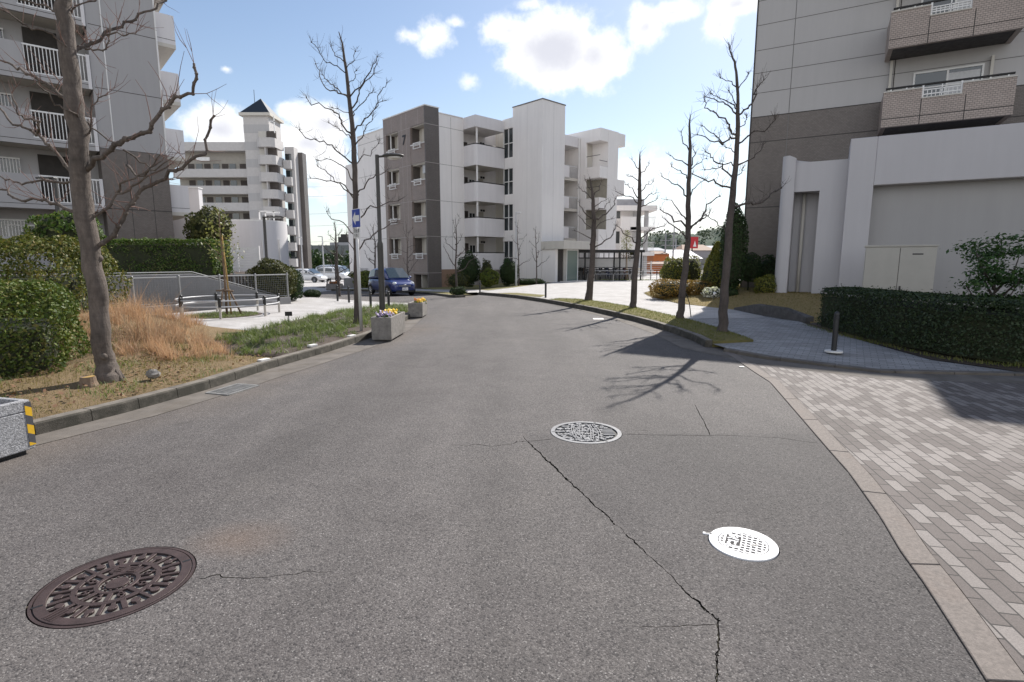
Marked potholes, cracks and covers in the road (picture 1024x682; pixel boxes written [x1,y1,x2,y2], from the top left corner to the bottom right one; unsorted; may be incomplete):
drain grate [205,383,259,397]
crack [461,438,721,682]
manhole cover [551,421,622,444]
manhole cover [703,527,779,562]
crack [636,405,798,441]
manhole cover [27,547,196,629]
crack [201,571,331,579]
